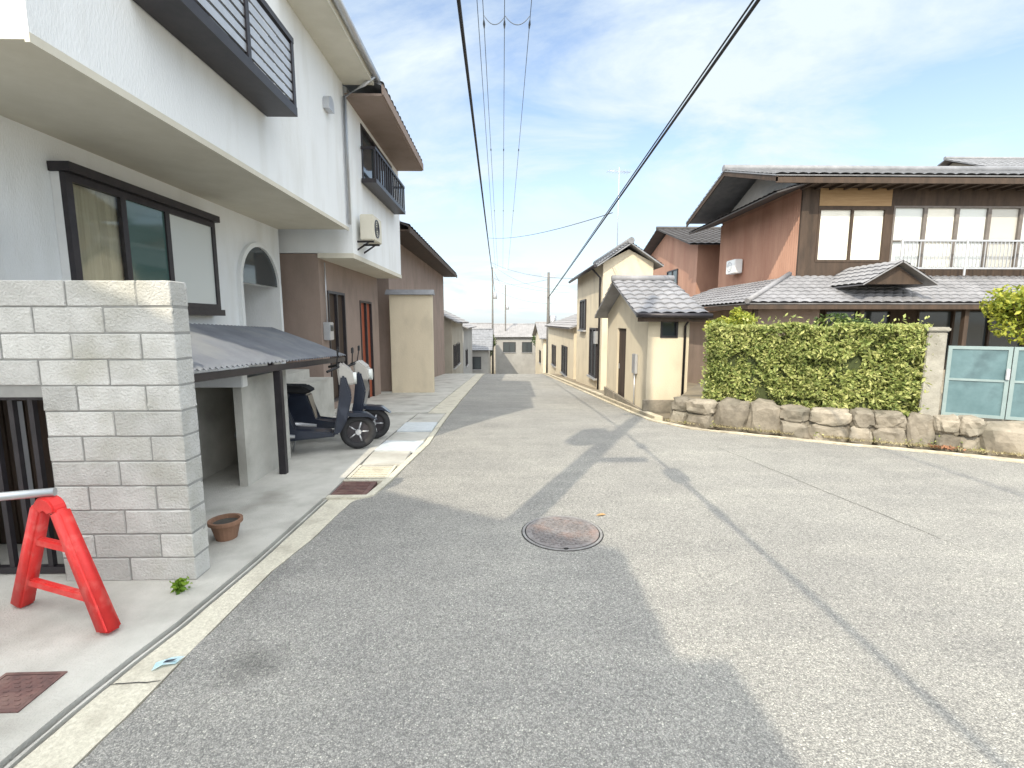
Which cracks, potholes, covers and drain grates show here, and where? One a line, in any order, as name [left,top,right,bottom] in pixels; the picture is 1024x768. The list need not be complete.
manhole cover [521,516,604,551]
